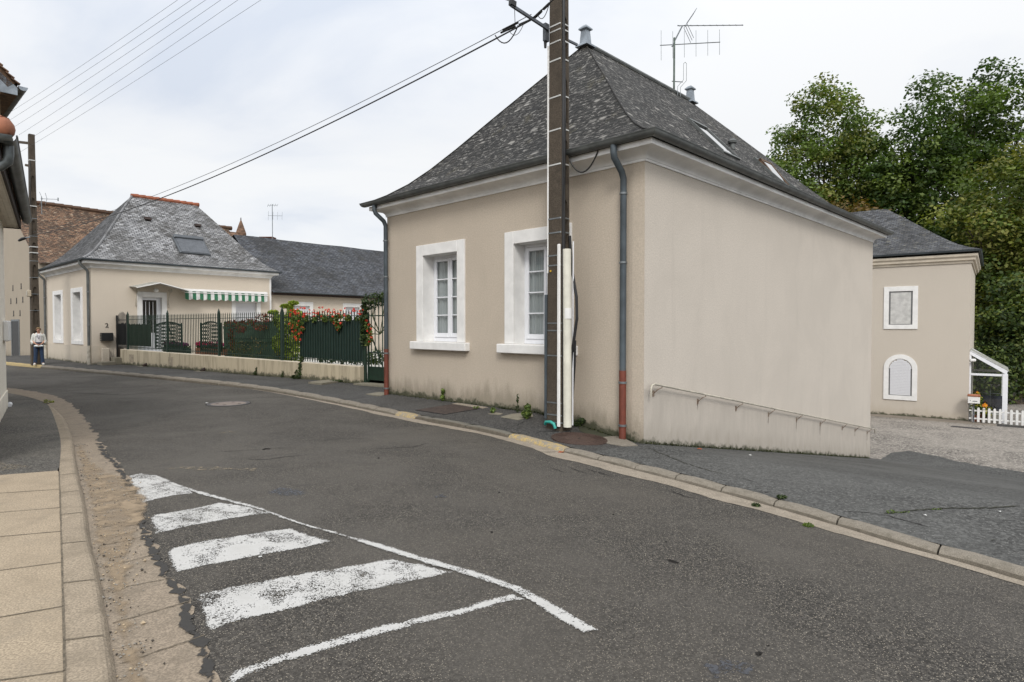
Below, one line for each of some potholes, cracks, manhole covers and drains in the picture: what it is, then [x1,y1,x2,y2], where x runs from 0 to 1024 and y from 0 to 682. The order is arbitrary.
manhole cover [551,432,608,445]
manhole cover [416,404,480,415]
